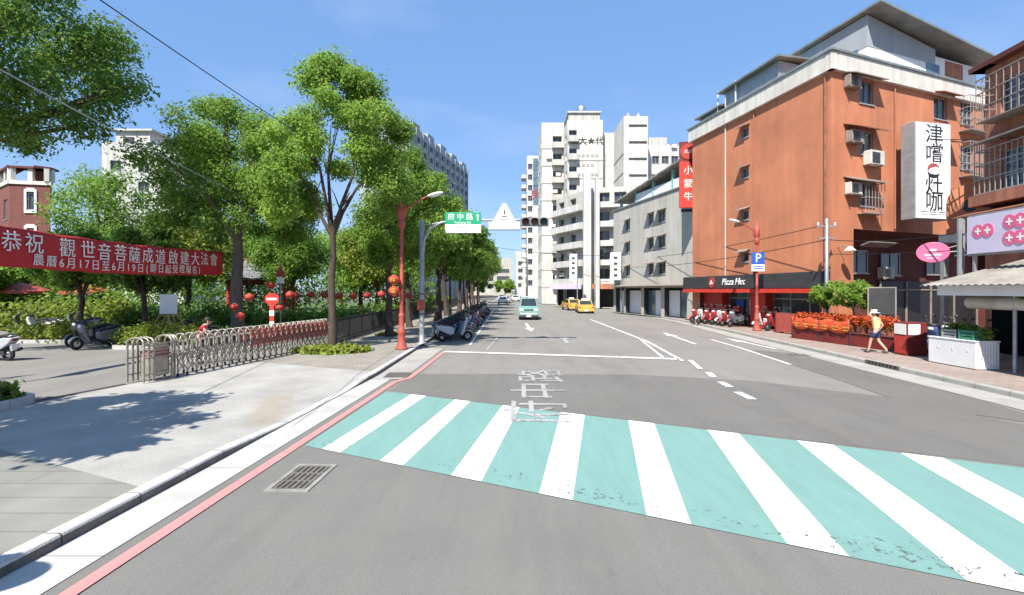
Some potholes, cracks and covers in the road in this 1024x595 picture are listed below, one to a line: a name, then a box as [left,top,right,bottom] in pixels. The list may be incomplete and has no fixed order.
drain grate [263,464,337,492]
